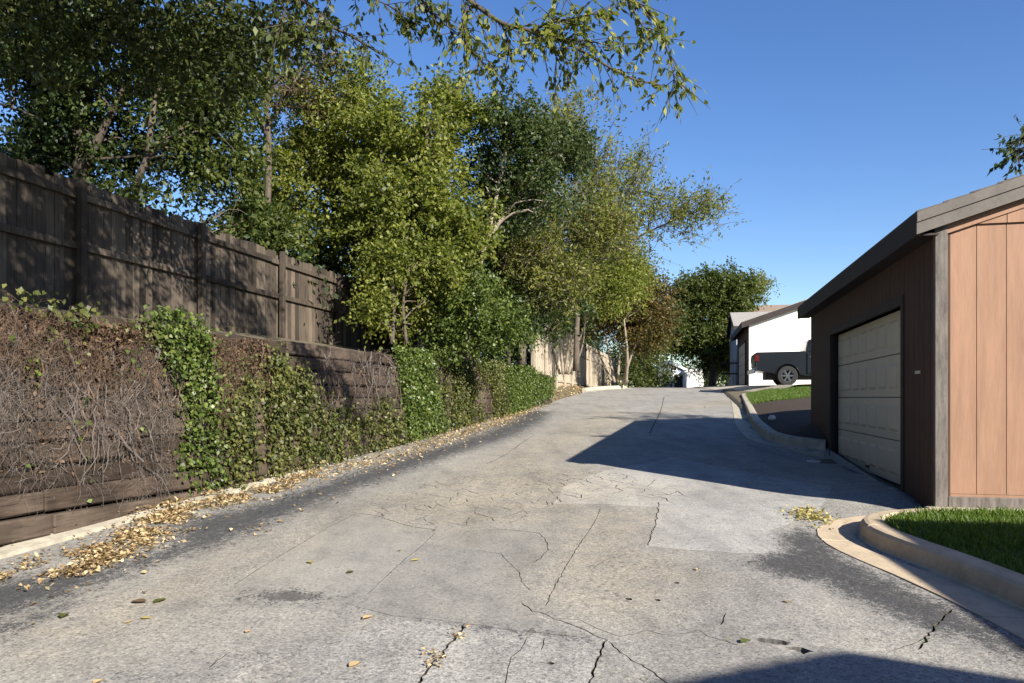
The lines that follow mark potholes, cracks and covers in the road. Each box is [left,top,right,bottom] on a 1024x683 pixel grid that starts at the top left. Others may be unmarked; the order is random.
crack [362,471,779,683]
